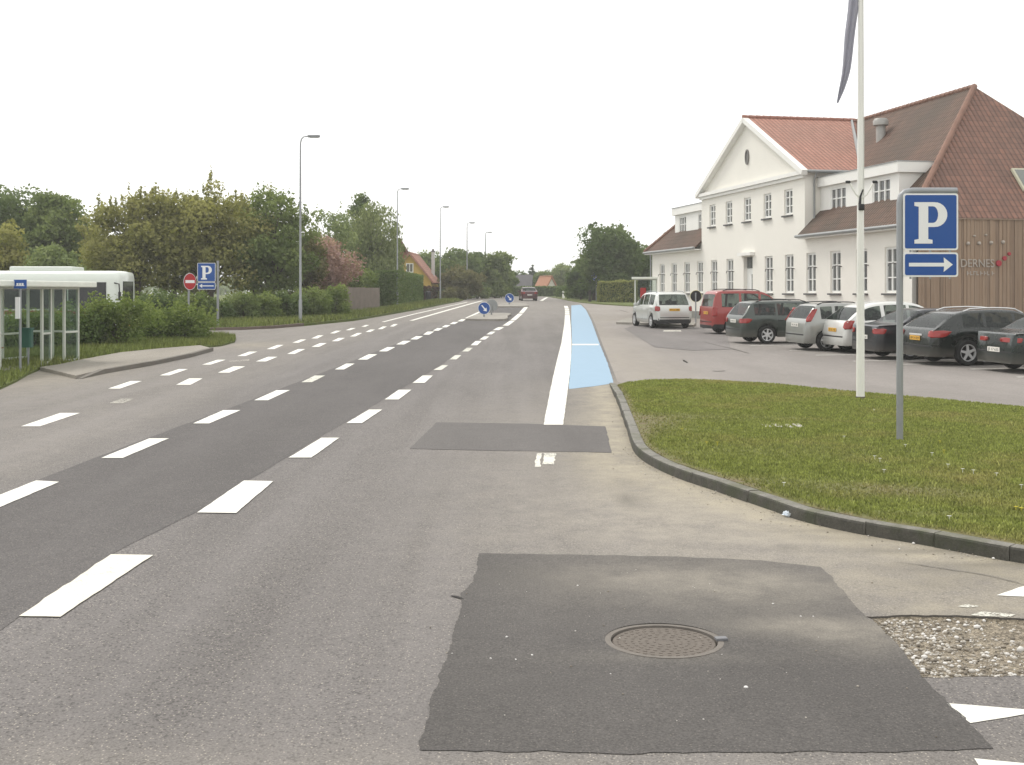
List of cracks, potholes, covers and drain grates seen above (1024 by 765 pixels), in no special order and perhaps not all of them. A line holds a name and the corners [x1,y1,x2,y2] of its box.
manhole cover [605,624,728,659]
